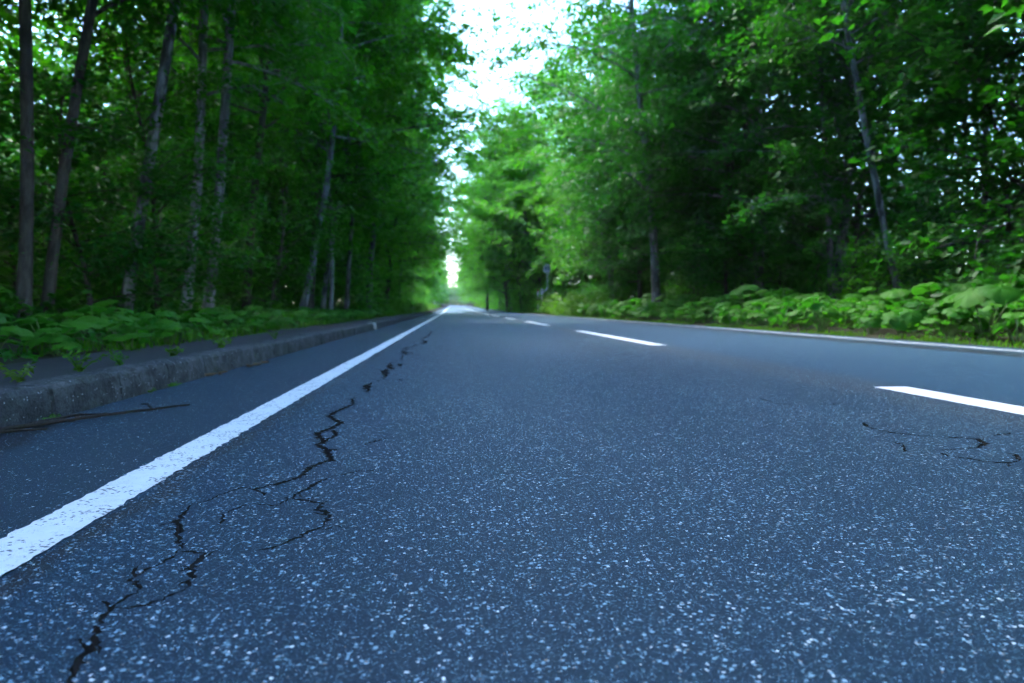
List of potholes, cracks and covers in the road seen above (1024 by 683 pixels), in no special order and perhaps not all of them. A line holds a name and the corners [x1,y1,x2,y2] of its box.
crack [65,331,434,683]
crack [861,422,1022,467]
